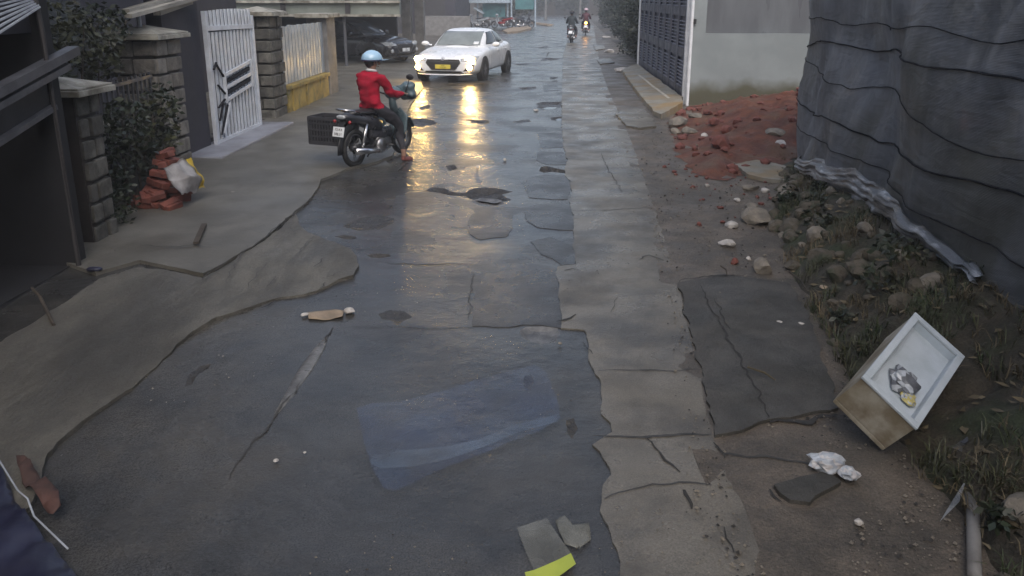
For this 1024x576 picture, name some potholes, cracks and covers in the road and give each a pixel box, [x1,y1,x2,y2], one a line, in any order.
crack [679,275,838,424]
pothole [424,187,513,204]
pothole [471,198,505,207]
pothole [379,310,412,326]
crack [605,438,711,509]
